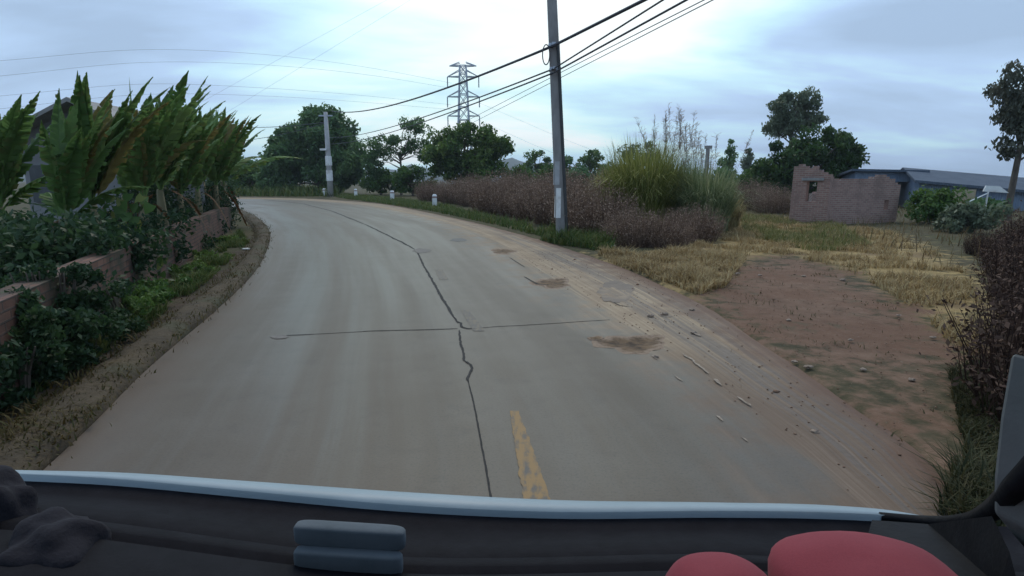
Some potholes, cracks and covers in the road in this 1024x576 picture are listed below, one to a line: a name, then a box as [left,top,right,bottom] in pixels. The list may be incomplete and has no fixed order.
crack [299,224,628,497]
